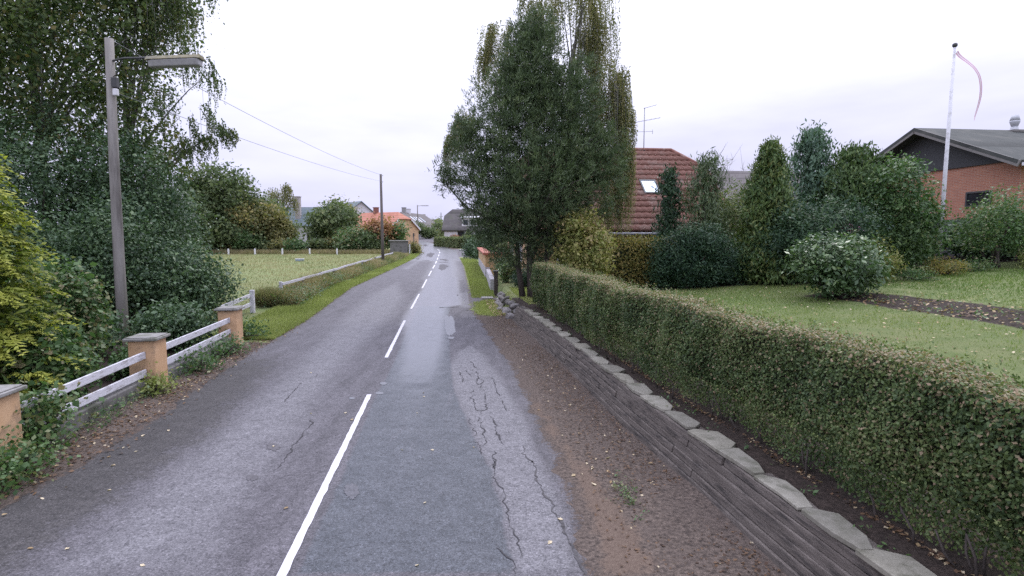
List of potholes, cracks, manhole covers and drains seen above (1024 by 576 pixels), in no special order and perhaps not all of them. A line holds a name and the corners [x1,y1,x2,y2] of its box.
crack [522,446,585,575]
crack [279,420,314,467]
crack [459,361,522,576]
